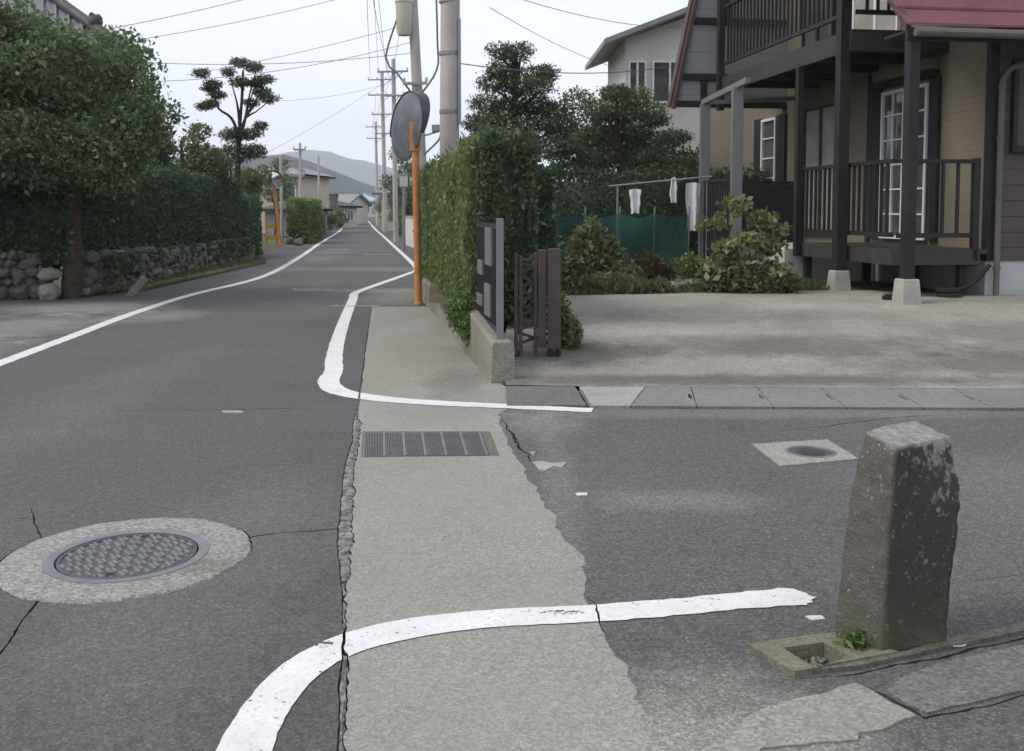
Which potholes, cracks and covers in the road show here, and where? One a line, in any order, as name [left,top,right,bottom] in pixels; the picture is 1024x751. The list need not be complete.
manhole cover [0,518,252,604]
drain grate [361,431,500,458]
crack [20,507,43,538]
crack [503,421,530,460]
manhole cover [752,439,858,467]
crack [774,413,999,432]
crack [249,309,372,751]
crack [0,600,38,654]
